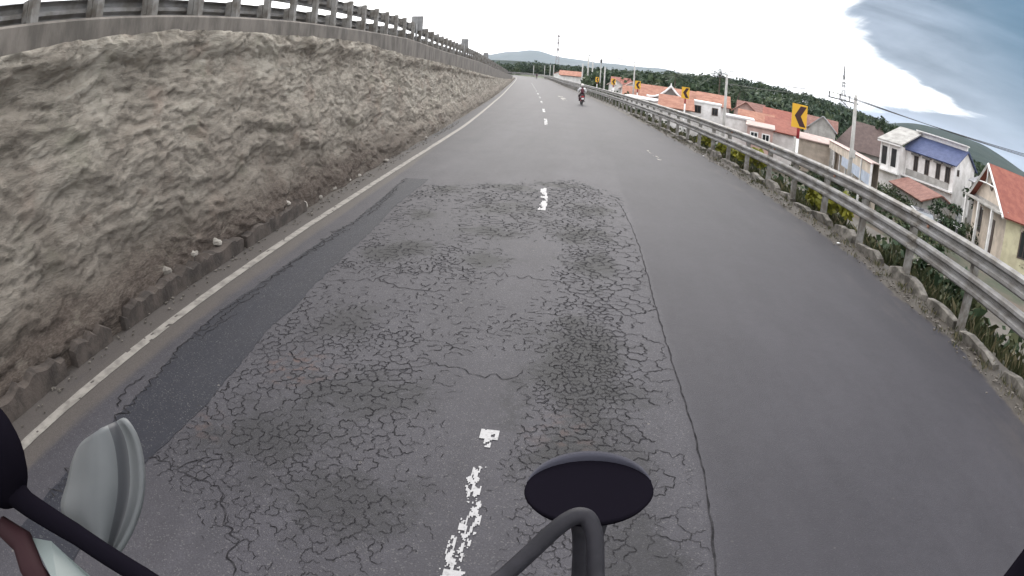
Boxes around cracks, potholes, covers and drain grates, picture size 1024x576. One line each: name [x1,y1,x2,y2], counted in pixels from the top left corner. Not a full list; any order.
crack [48,178,408,498]
crack [153,178,709,576]
